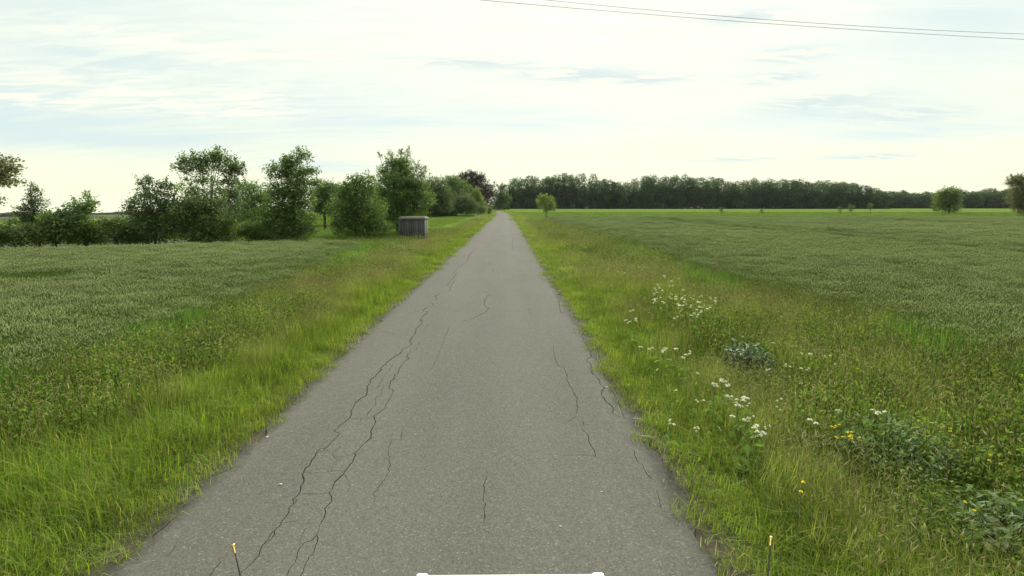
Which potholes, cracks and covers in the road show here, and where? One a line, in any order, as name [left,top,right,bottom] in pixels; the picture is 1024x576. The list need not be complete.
crack [240,246,490,576]
crack [581,335,625,419]
crack [553,348,596,457]
